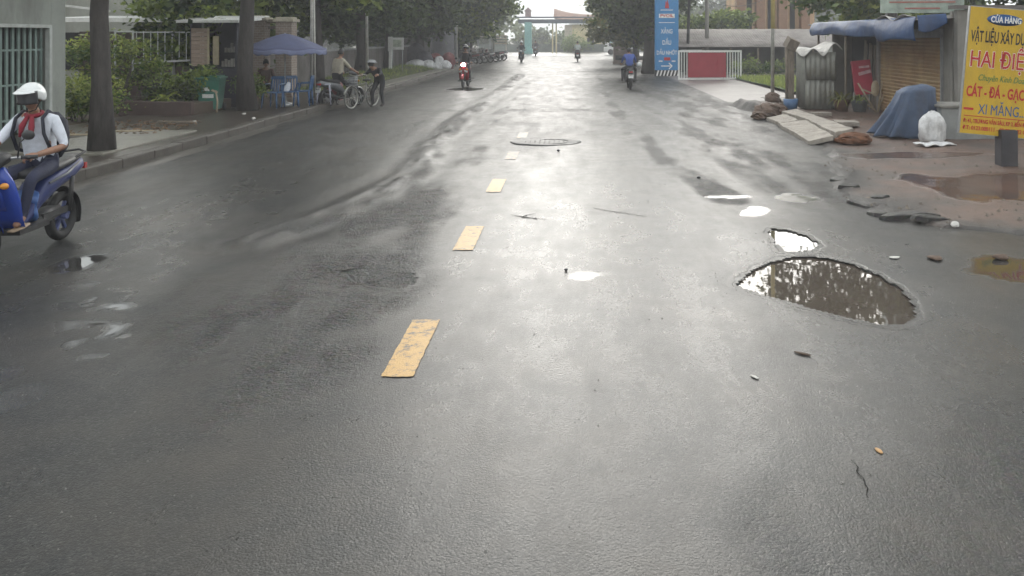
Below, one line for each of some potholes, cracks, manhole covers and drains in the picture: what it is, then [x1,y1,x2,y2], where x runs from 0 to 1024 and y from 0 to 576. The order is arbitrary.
pothole [725,253,933,330]
manhole cover [510,138,581,146]
pothole [758,225,832,256]
